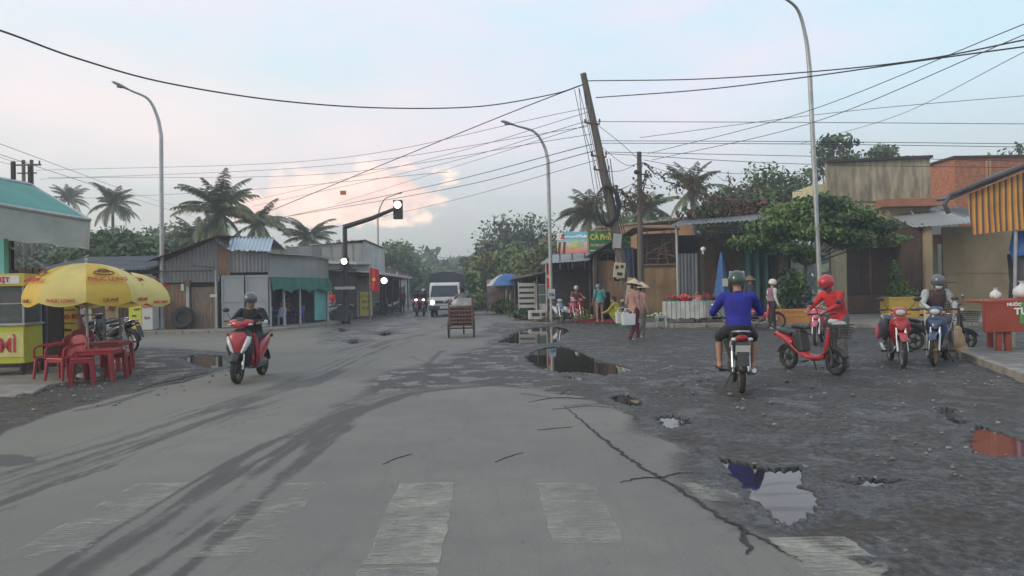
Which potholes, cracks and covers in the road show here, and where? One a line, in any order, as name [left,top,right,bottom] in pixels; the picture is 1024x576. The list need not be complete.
pothole [709,454,838,534]
pothole [950,424,1024,462]
pothole [516,345,641,379]
pothole [600,393,653,409]
pothole [495,326,577,345]
pothole [927,405,978,429]
crack [531,389,803,562]
pothole [174,353,231,369]
